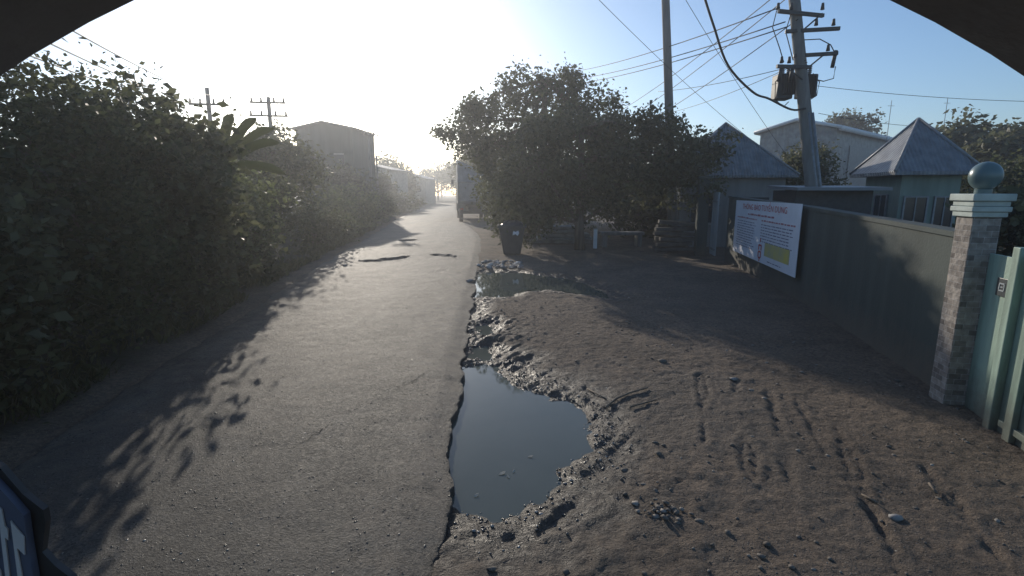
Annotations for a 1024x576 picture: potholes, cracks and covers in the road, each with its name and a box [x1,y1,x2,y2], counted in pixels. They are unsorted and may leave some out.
pothole [465,344,505,362]
pothole [473,270,620,300]
pothole [448,360,610,541]
pothole [471,321,504,336]
